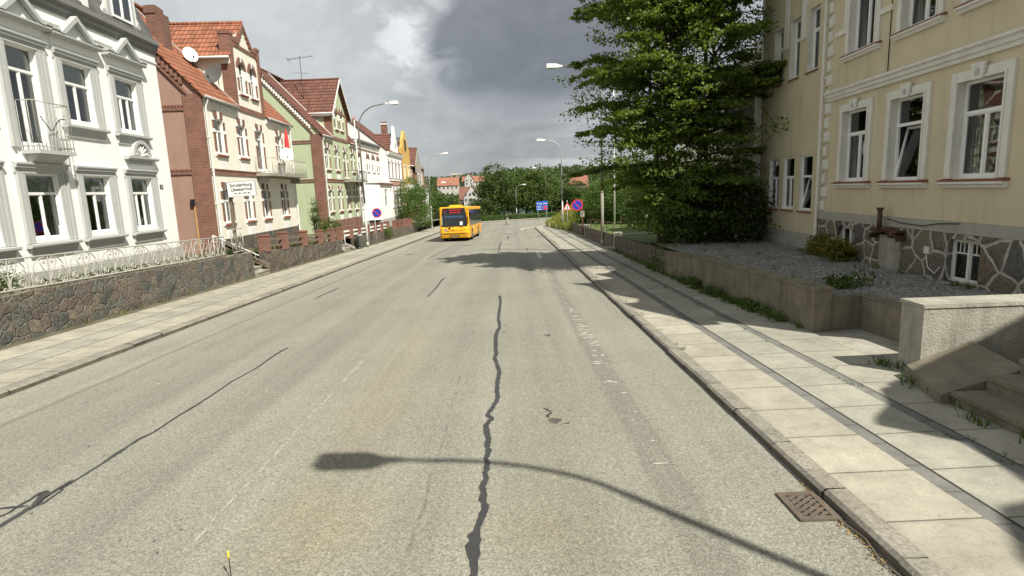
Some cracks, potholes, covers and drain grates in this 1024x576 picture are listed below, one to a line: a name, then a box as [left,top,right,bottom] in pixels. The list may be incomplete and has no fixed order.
drain grate [775,491,842,522]
